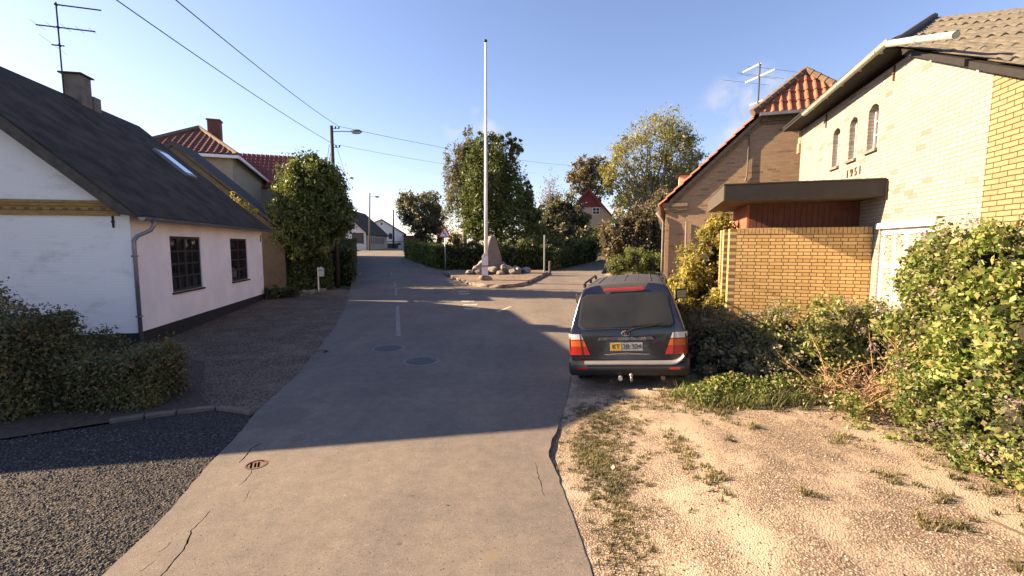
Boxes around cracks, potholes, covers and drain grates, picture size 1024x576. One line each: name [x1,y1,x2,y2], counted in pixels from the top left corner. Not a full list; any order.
manhole cover [403,356,439,366]
manhole cover [372,344,405,352]
crack [139,511,210,576]
